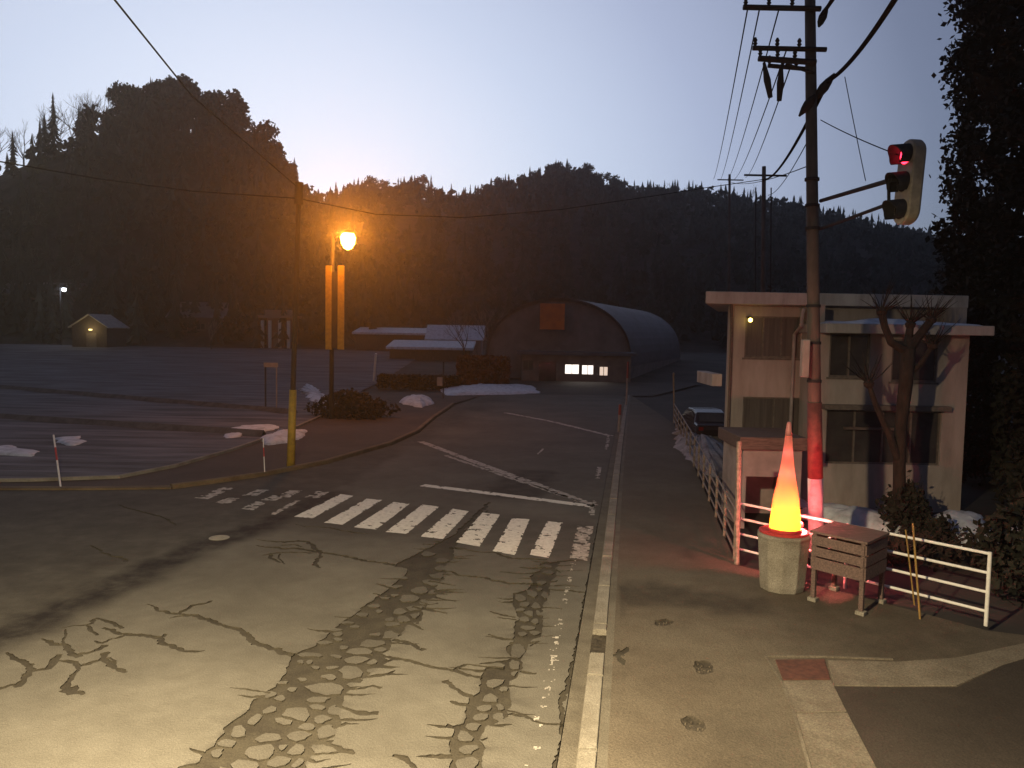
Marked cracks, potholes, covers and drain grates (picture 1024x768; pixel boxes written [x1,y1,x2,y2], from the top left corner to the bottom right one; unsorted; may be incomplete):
crack [0,502,598,768]
